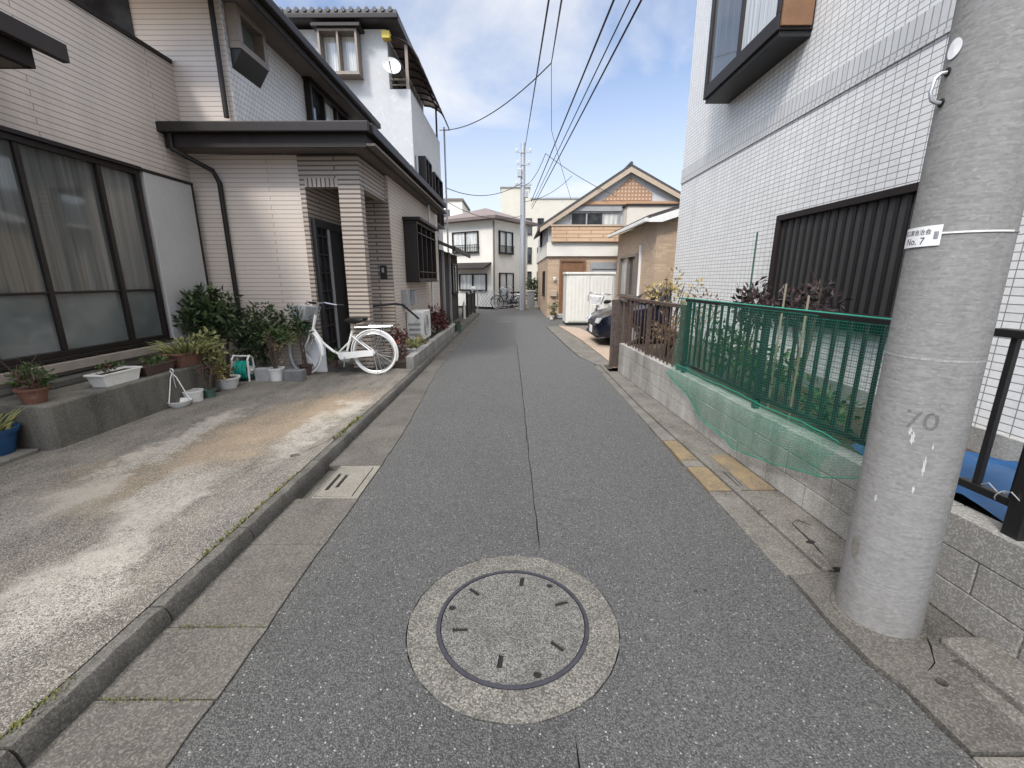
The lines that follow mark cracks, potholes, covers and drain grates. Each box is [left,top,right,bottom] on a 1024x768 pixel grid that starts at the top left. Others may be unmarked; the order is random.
crack [792,519,824,555]
manhole cover [407,556,619,725]
crack [517,351,540,547]
